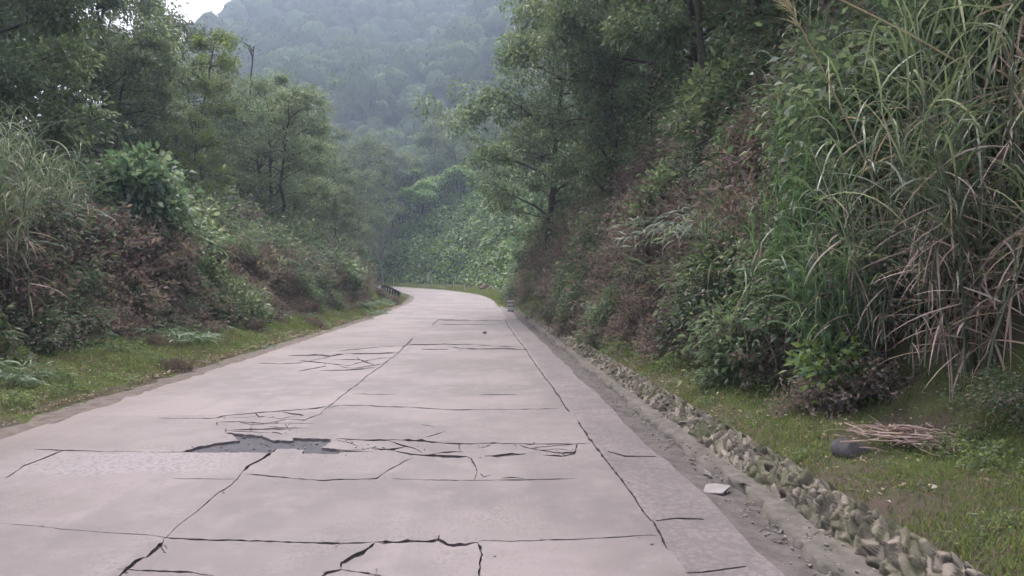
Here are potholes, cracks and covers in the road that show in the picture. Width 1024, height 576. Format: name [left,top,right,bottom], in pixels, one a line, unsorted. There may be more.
pothole [183,433,341,455]
crack [14,319,704,576]
